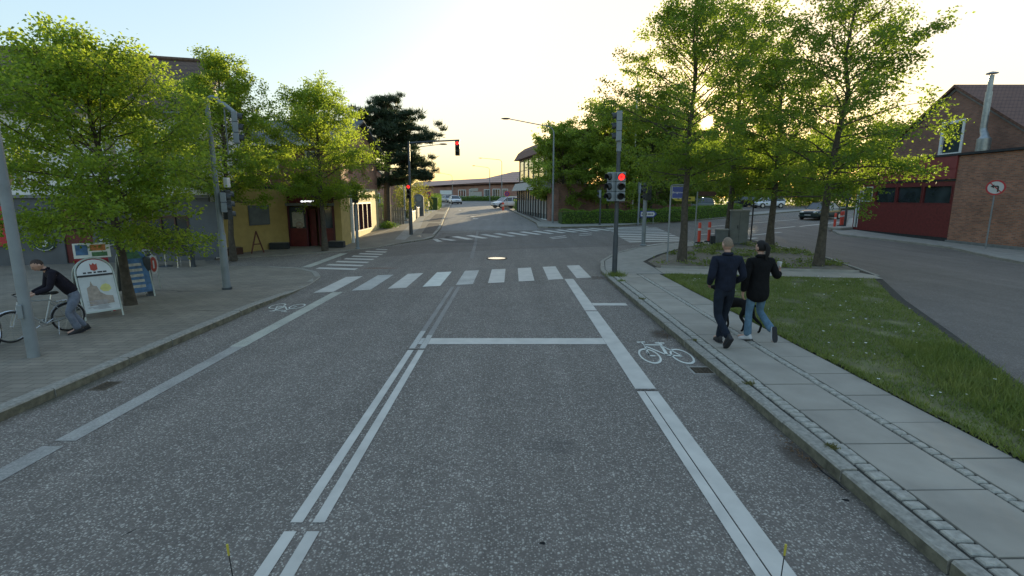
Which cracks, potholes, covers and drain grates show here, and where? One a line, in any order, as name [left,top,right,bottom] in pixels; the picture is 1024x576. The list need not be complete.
drain grate [686,366,716,374]
drain grate [87,381,123,391]
